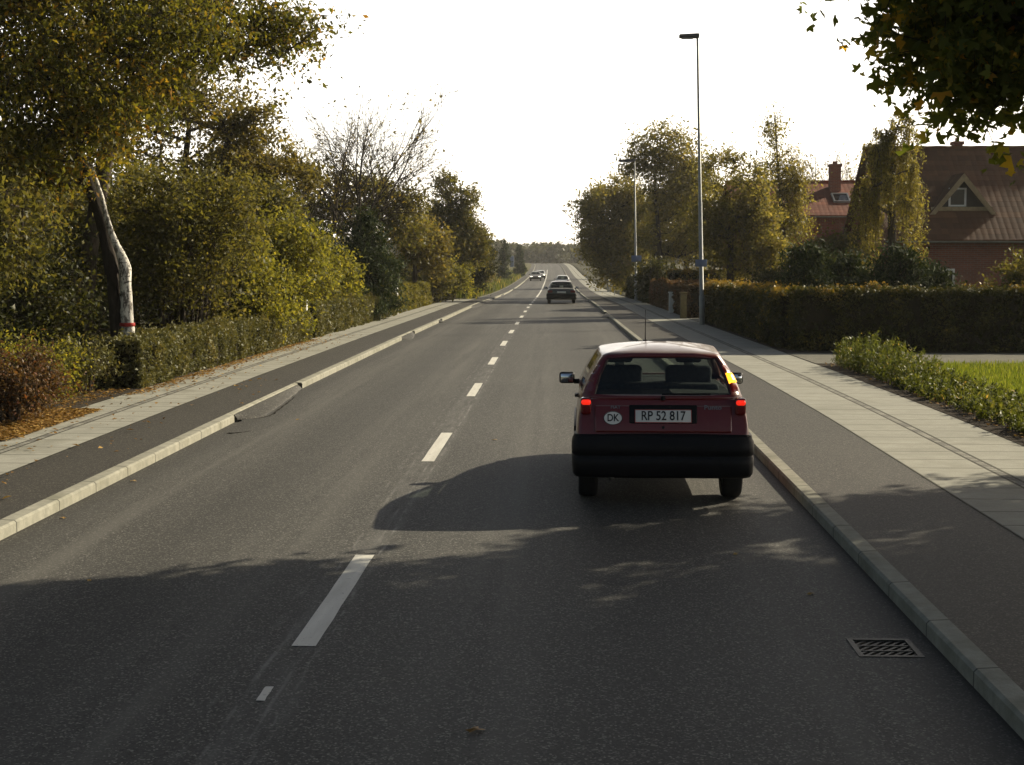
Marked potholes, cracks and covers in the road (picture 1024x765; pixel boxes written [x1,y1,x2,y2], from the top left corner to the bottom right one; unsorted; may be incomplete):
drain grate [846,638,925,658]
